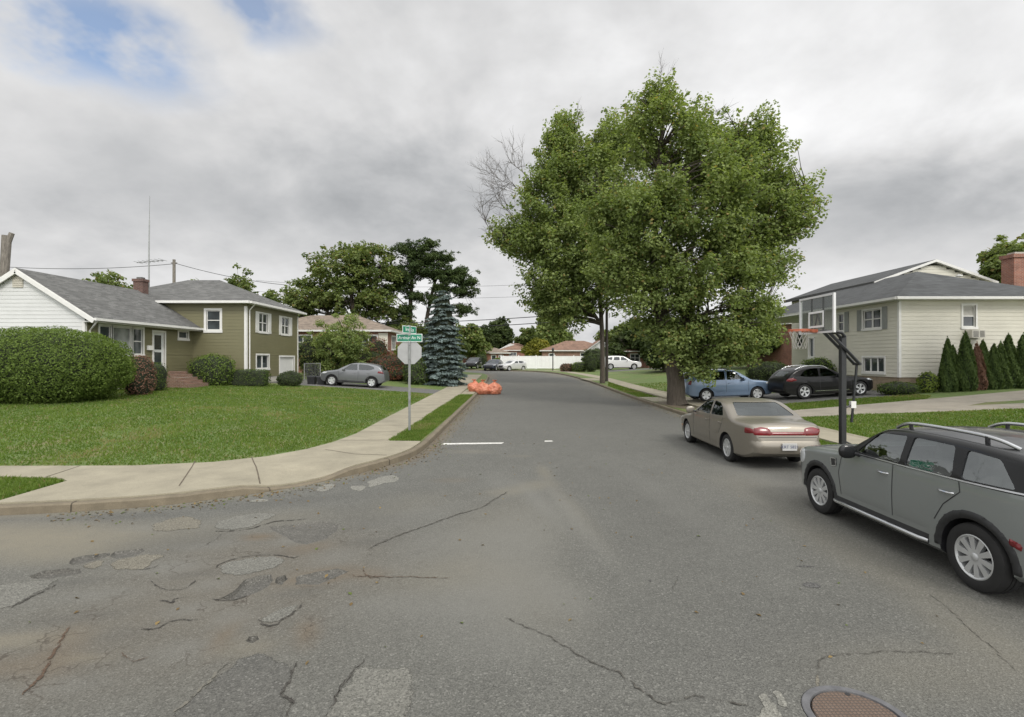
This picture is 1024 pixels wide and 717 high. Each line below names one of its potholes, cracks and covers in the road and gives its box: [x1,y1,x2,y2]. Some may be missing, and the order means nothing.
crack [22,627,70,695]
pothole [69,553,110,565]
manhole cover [801,685,908,717]
crack [931,594,1017,671]
crack [817,650,953,668]
crack [509,618,753,708]
pothole [220,574,273,599]
